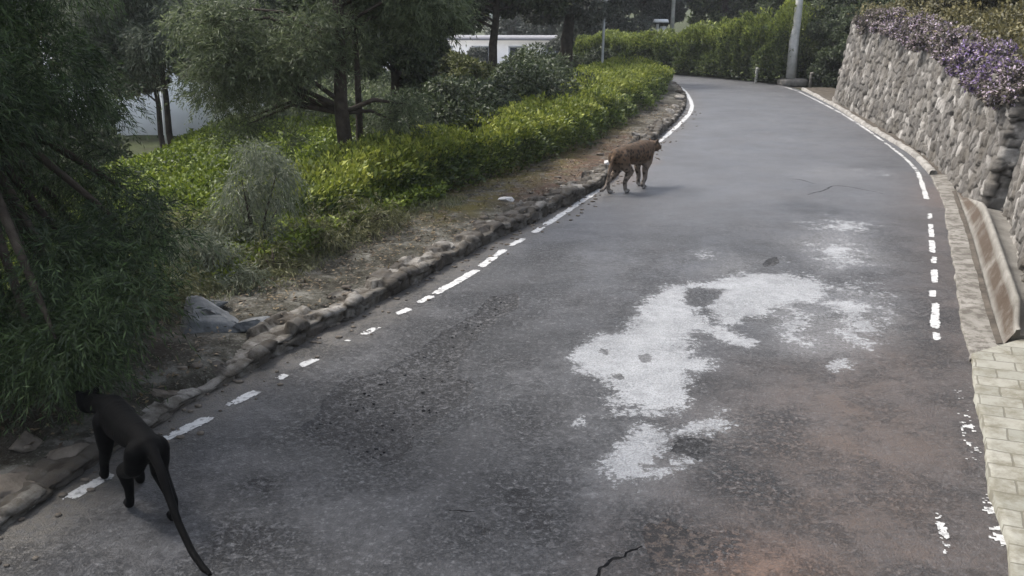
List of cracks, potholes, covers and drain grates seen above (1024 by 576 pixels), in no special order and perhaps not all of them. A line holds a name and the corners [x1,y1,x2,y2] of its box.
pothole [763,257,779,267]
crack [596,546,643,576]
